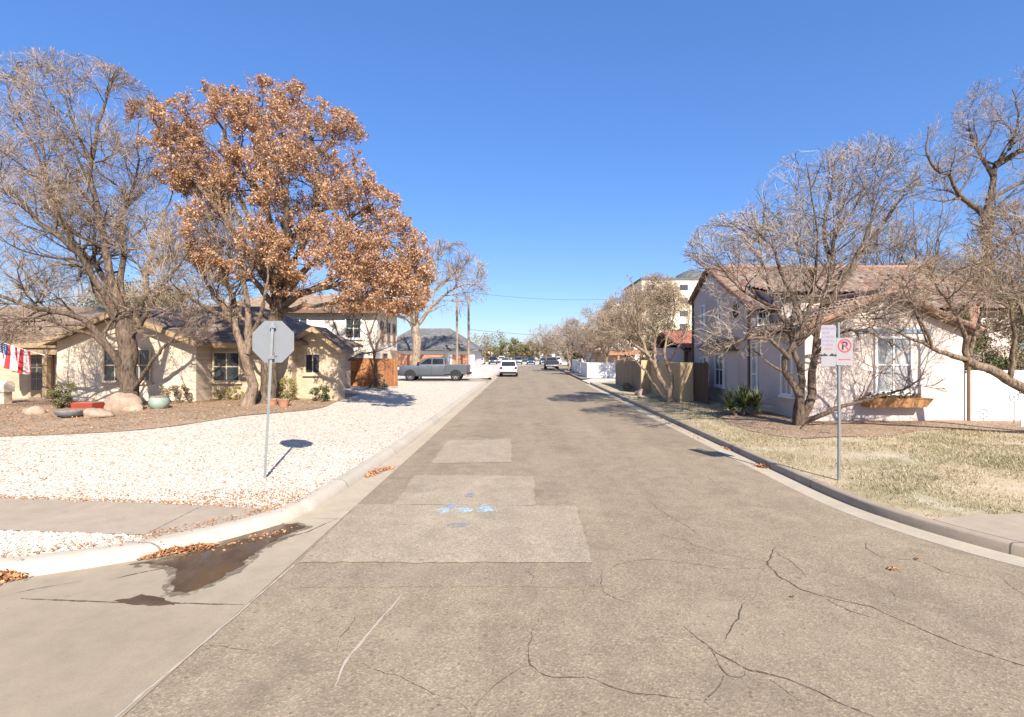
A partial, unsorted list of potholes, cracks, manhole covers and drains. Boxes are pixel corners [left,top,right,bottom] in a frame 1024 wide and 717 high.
crack [600,505,1024,666]
crack [684,602,874,717]
crack [457,619,697,717]
